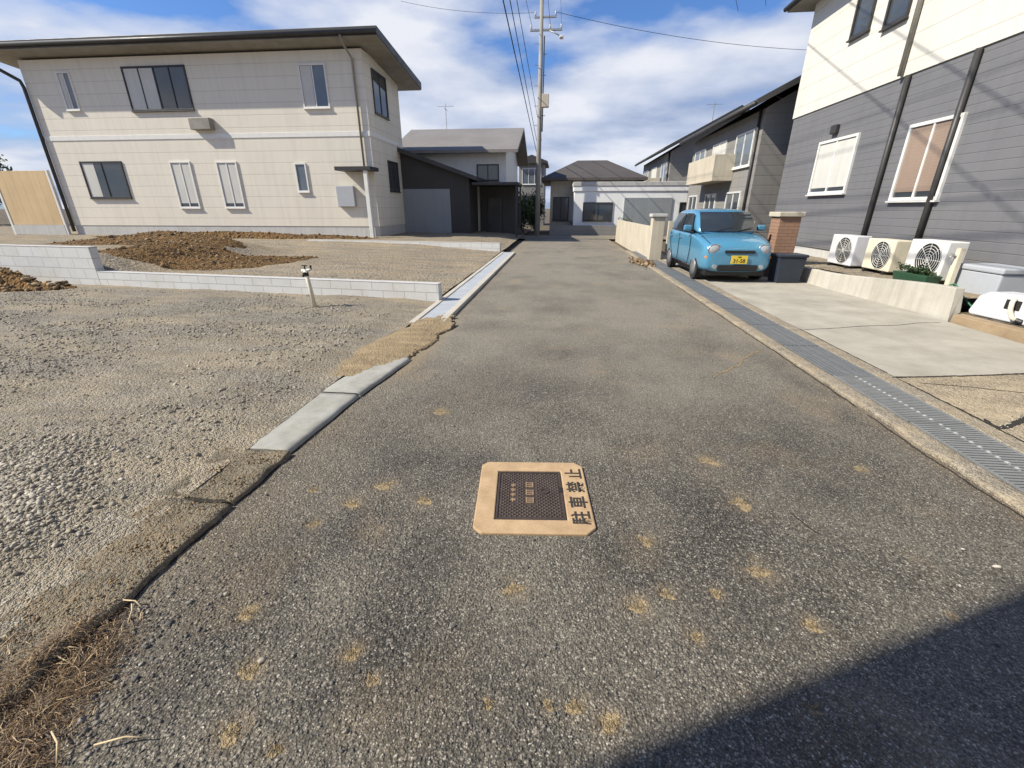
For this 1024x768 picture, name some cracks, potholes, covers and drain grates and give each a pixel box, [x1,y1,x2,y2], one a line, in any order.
drain grate [749,324,819,346]
drain grate [783,345,875,376]
drain grate [691,288,727,297]
drain grate [725,309,779,325]
drain grate [678,280,709,288]
drain grate [832,375,965,424]
drain grate [705,297,749,309]
drain grate [909,422,1024,493]
manhole cover [473,462,596,537]
